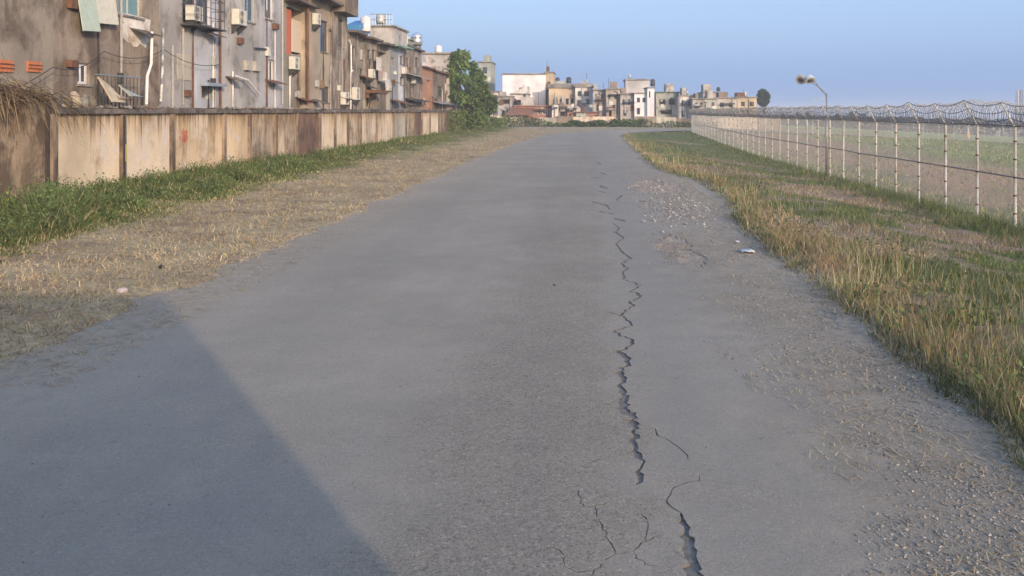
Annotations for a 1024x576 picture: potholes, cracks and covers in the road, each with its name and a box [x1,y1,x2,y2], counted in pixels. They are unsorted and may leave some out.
pothole [654,234,708,268]
crack [544,490,657,575]
crack [666,477,704,576]
crack [590,162,688,485]
